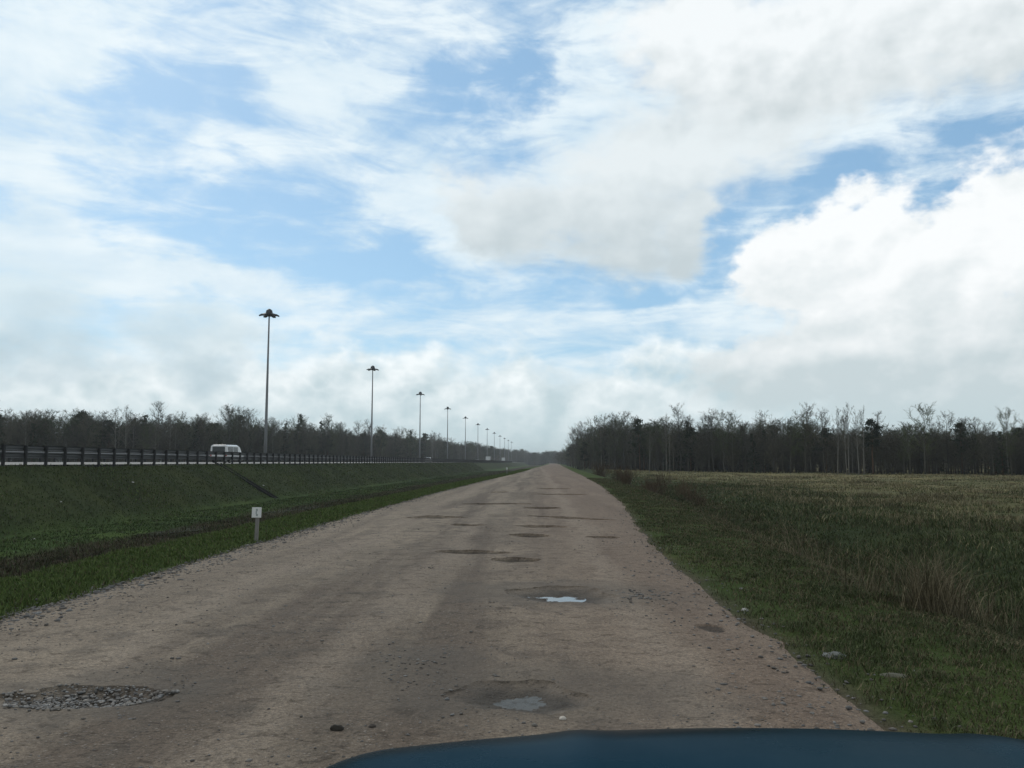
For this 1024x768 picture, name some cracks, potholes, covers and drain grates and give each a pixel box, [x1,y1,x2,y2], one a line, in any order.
pothole [0,683,180,711]
pothole [504,586,620,604]
pothole [694,624,726,633]
pothole [441,679,600,715]
